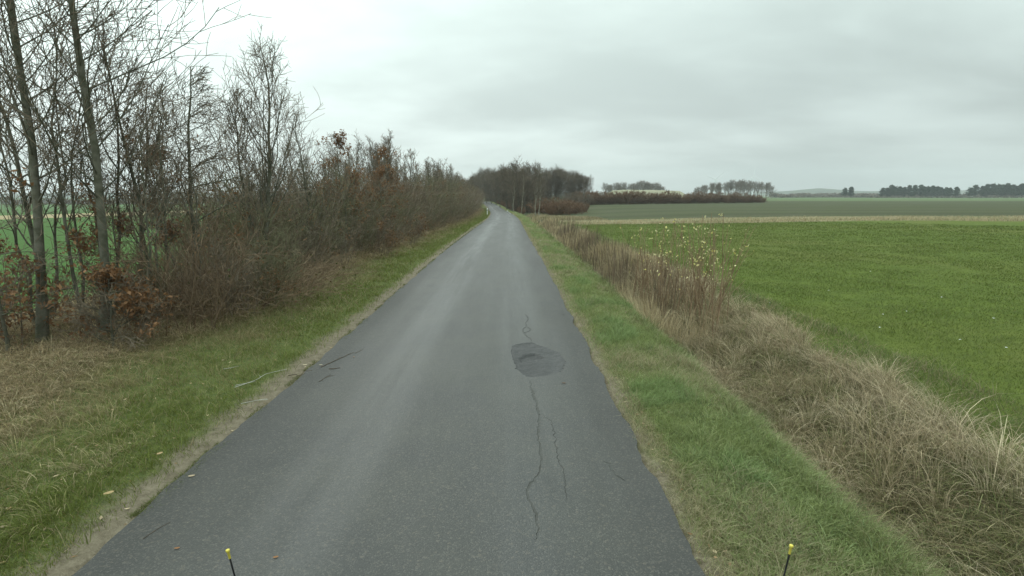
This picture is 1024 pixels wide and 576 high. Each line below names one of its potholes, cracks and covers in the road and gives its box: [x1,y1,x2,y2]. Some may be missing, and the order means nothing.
crack [526,381,567,539]
crack [603,461,625,481]
